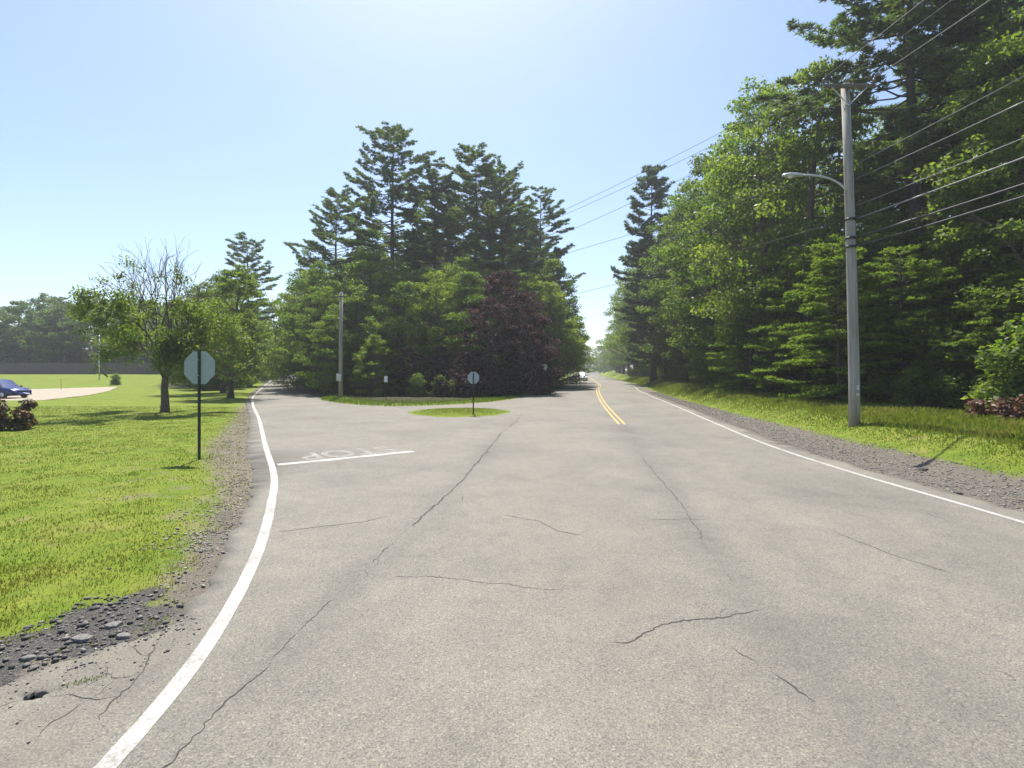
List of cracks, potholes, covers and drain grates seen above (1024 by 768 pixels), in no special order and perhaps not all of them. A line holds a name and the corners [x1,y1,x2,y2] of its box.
crack [507,457,731,580]
crack [618,607,761,643]
crack [163,421,517,768]
crack [735,649,814,701]
crack [2,641,159,740]
